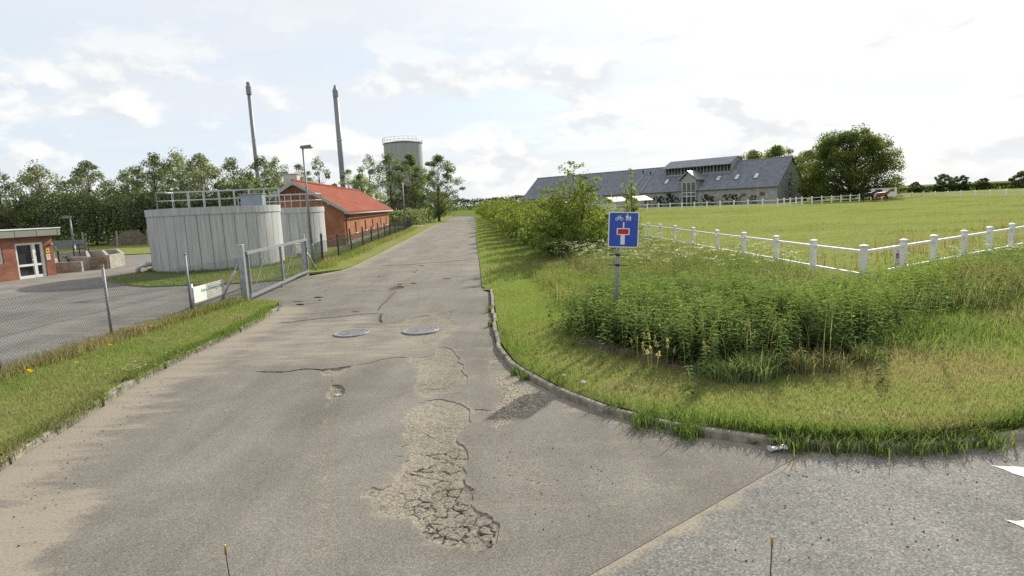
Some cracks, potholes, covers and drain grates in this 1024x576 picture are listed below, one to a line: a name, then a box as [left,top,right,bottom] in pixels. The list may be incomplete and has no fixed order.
crack [256,357,405,383]
manhole cover [333,329,370,338]
crack [283,292,396,323]
crack [397,431,496,549]
manhole cover [402,326,439,335]
pothole [326,384,345,399]
